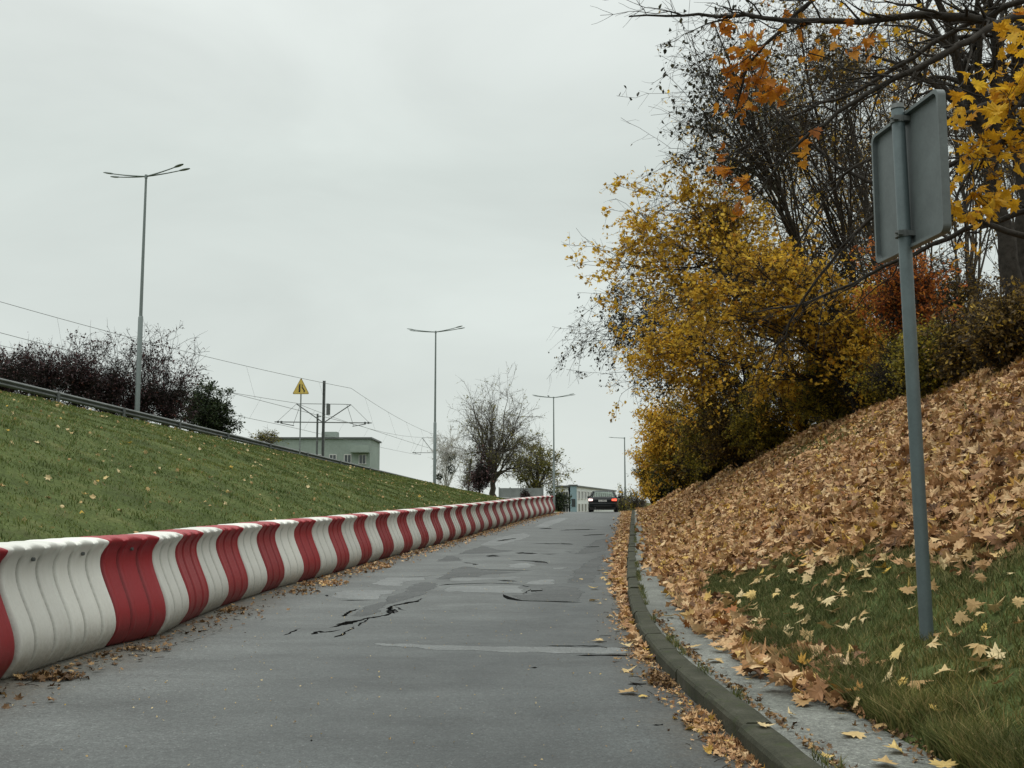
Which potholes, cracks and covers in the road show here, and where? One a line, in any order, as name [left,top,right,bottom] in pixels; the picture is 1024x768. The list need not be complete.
crack [285,598,422,637]
